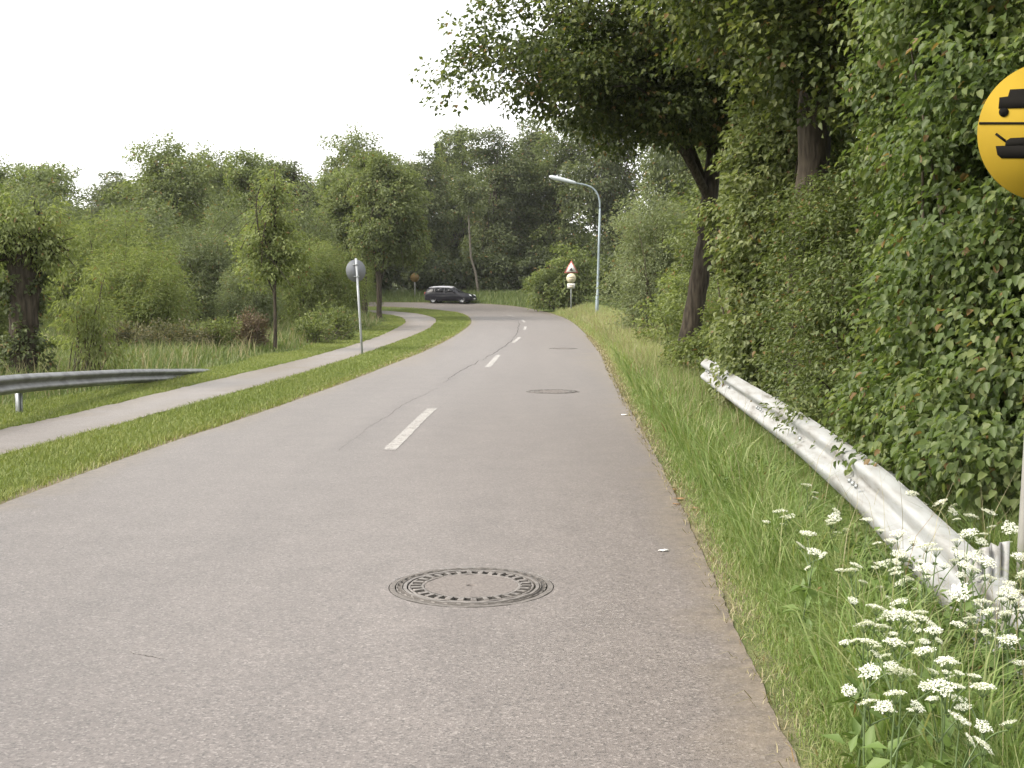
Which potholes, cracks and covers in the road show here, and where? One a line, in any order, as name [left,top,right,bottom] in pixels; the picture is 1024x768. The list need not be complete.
manhole cover [388,567,554,608]
